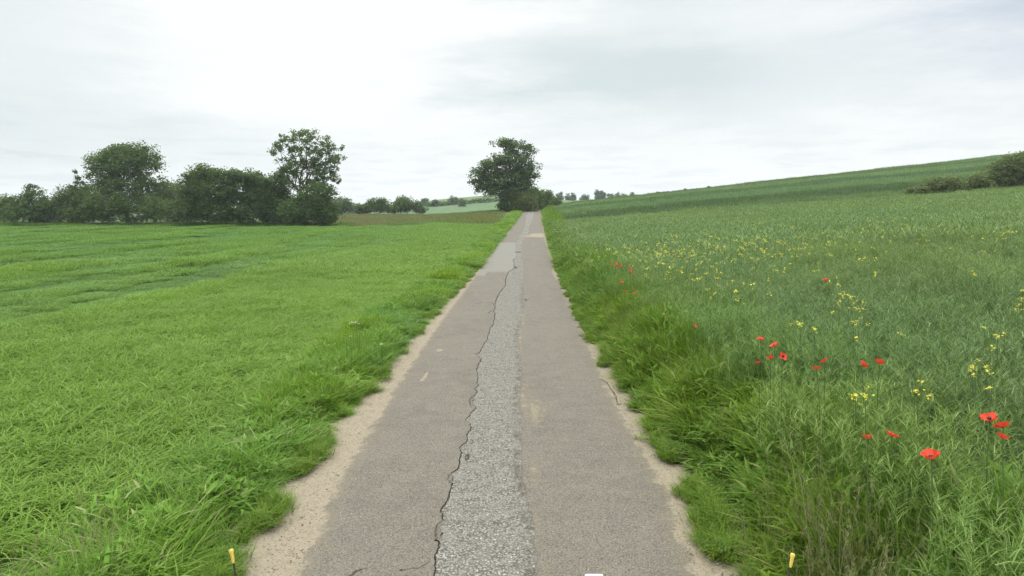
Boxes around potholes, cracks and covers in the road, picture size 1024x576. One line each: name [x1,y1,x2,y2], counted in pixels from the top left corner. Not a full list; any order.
crack [601,379,620,404]
crack [402,257,517,576]
